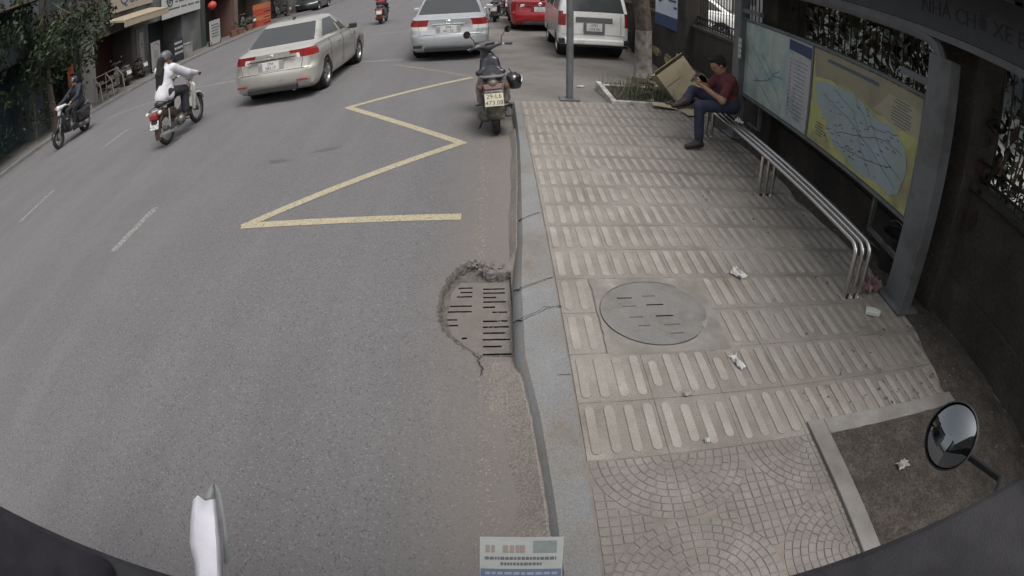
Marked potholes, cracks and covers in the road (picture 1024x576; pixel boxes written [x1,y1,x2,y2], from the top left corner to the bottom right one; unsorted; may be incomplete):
manhole cover [600,282,706,346]
crack [472,353,485,376]
